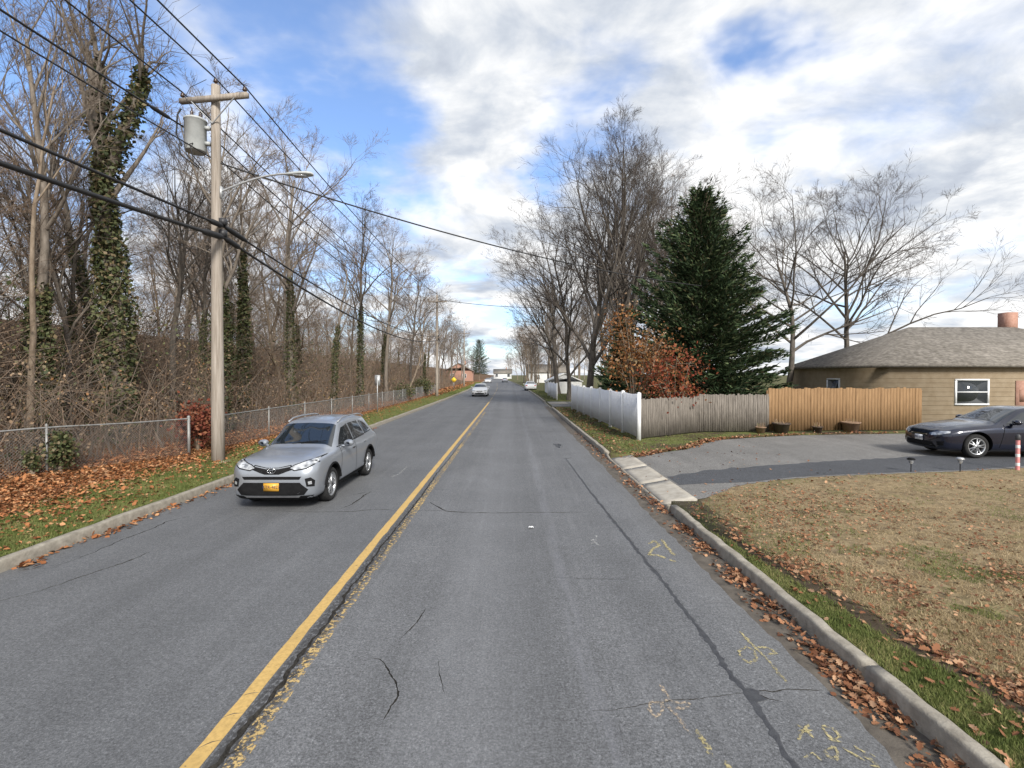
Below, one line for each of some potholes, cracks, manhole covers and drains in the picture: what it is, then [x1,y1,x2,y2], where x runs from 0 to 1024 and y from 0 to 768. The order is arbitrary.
crack [0,516,189,601]
crack [375,658,400,720]
crack [288,492,565,513]
crack [759,689,818,701]
crack [596,693,737,711]
